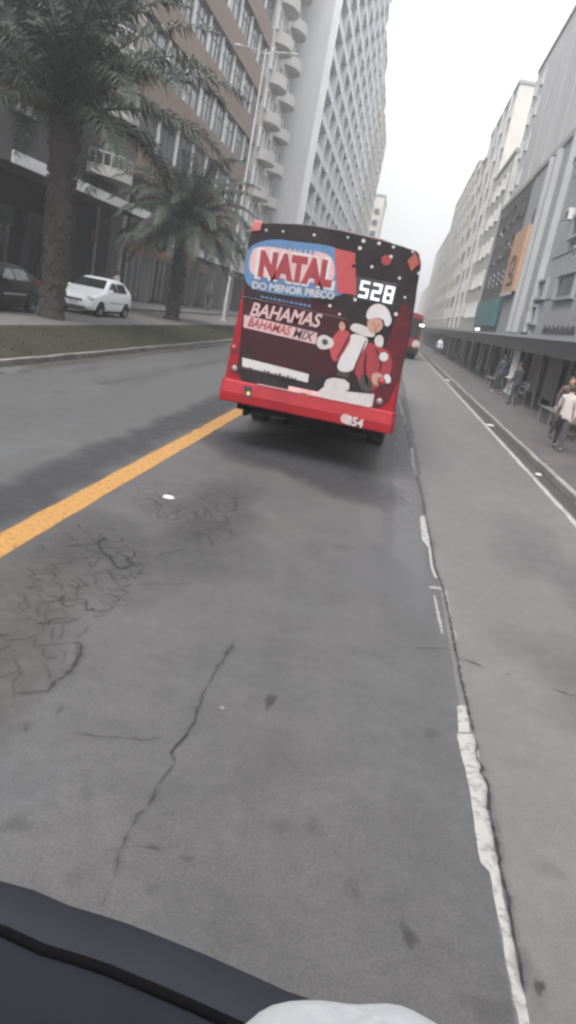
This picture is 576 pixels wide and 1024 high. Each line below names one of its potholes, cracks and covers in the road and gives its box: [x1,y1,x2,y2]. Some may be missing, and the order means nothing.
crack [25,646,83,693]
crack [98,538,133,578]
